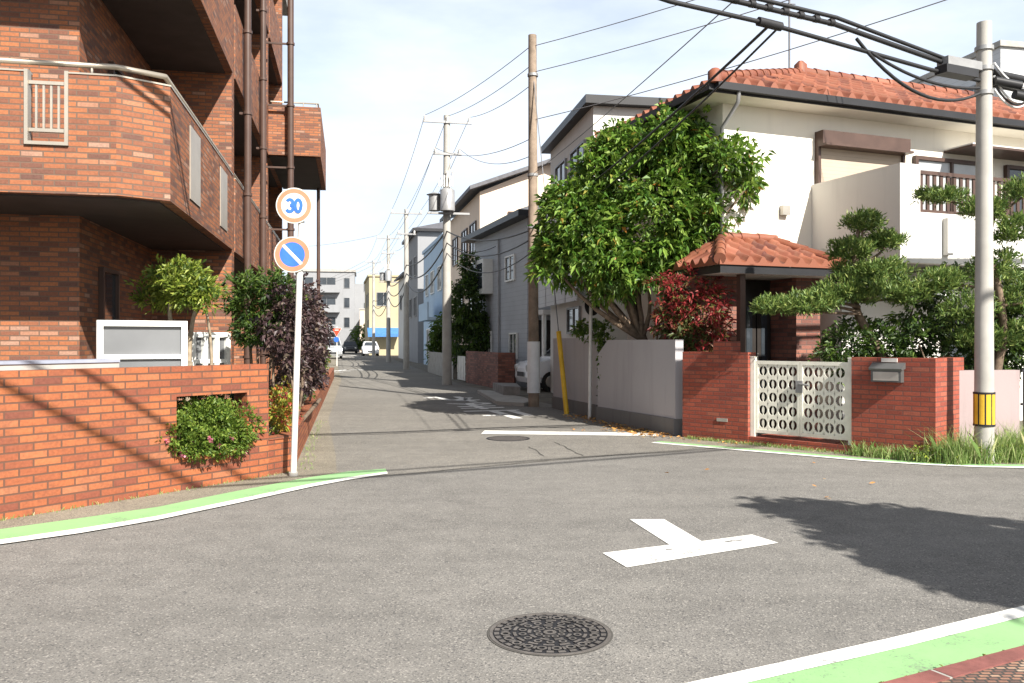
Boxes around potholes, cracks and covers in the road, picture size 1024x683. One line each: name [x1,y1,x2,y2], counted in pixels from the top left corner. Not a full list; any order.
manhole cover [487,612,613,656]
